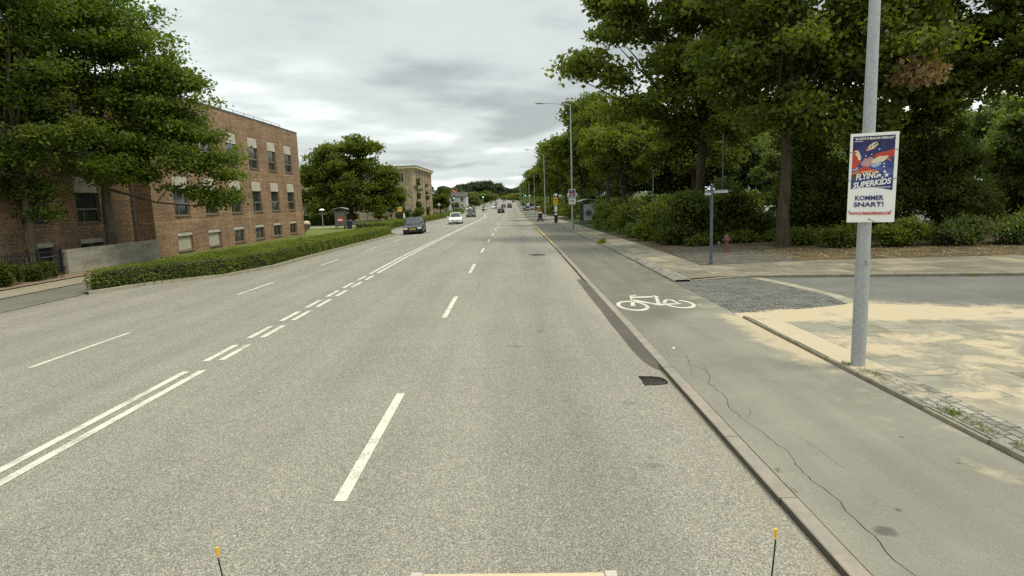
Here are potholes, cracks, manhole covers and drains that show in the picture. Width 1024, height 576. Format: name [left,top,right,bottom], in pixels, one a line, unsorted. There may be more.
drain grate [638,376,668,386]
crack [656,337,916,576]
